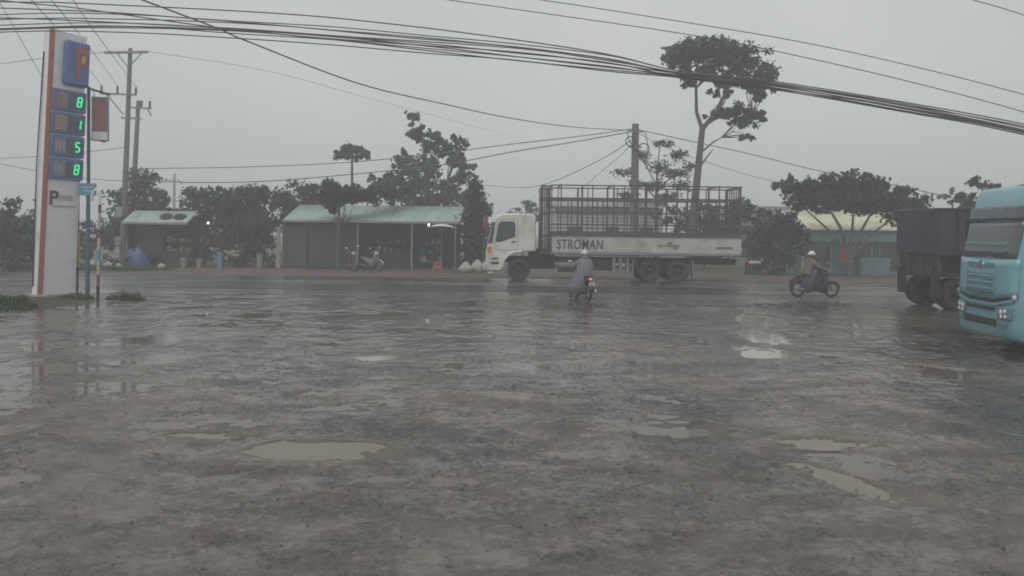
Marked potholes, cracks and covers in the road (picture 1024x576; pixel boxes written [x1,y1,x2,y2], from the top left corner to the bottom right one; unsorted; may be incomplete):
pothole [727,344,800,362]
pothole [743,434,917,452]
pothole [776,460,916,508]
pothole [223,437,416,464]
pothole [731,328,802,347]
pothole [341,354,403,362]
